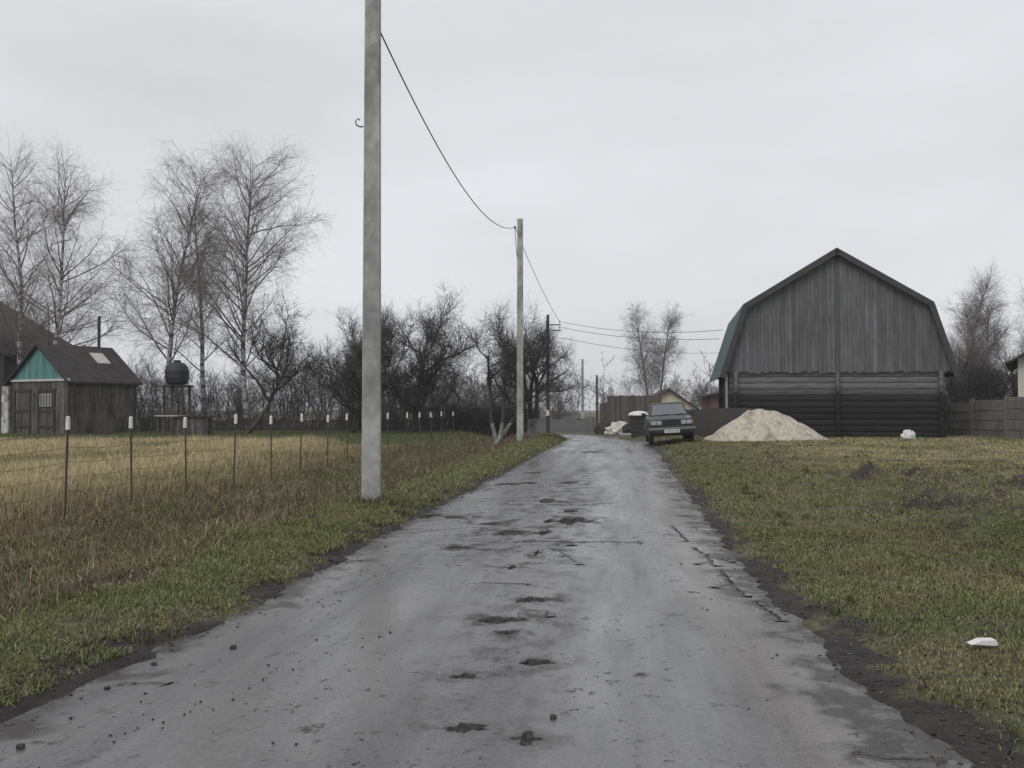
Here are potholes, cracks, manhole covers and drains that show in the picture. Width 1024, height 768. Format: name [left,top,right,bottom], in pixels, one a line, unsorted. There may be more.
crack [664,526,792,622]
pothole [465,615,540,626]
pothole [435,670,492,683]
pothole [504,656,571,670]
pothole [553,516,591,527]
pothole [532,529,556,537]
pothole [490,727,561,752]
pothole [423,718,507,738]
pothole [504,595,562,605]
